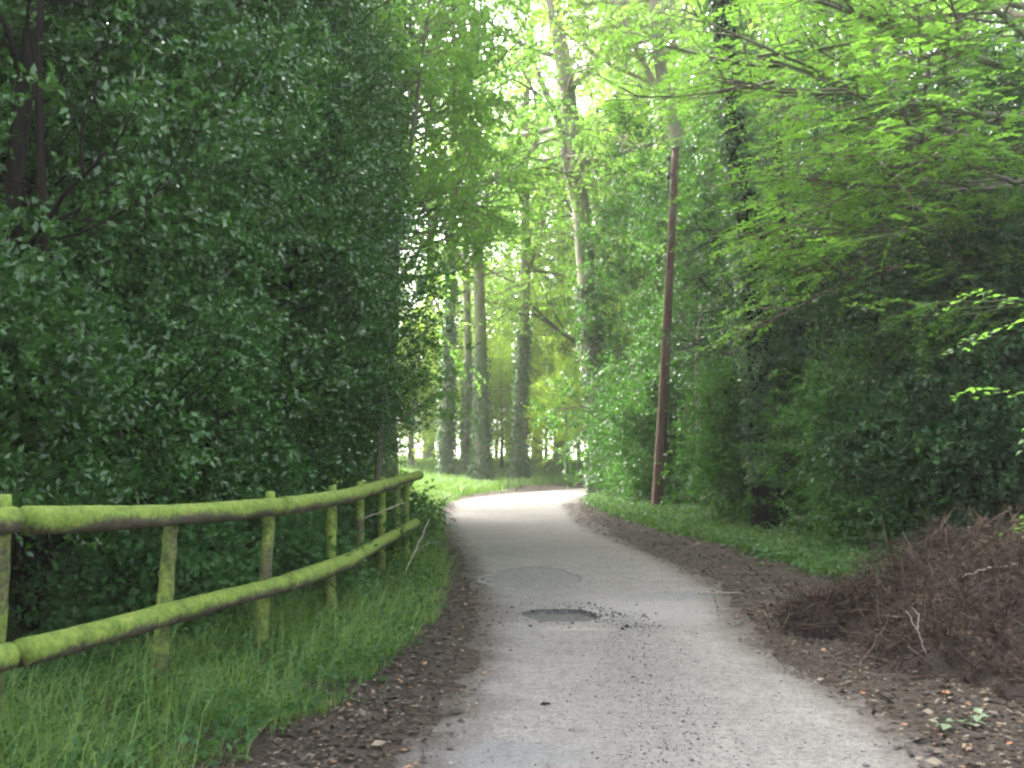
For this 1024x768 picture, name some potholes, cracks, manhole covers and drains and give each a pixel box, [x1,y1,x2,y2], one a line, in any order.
pothole [510,607,610,625]
